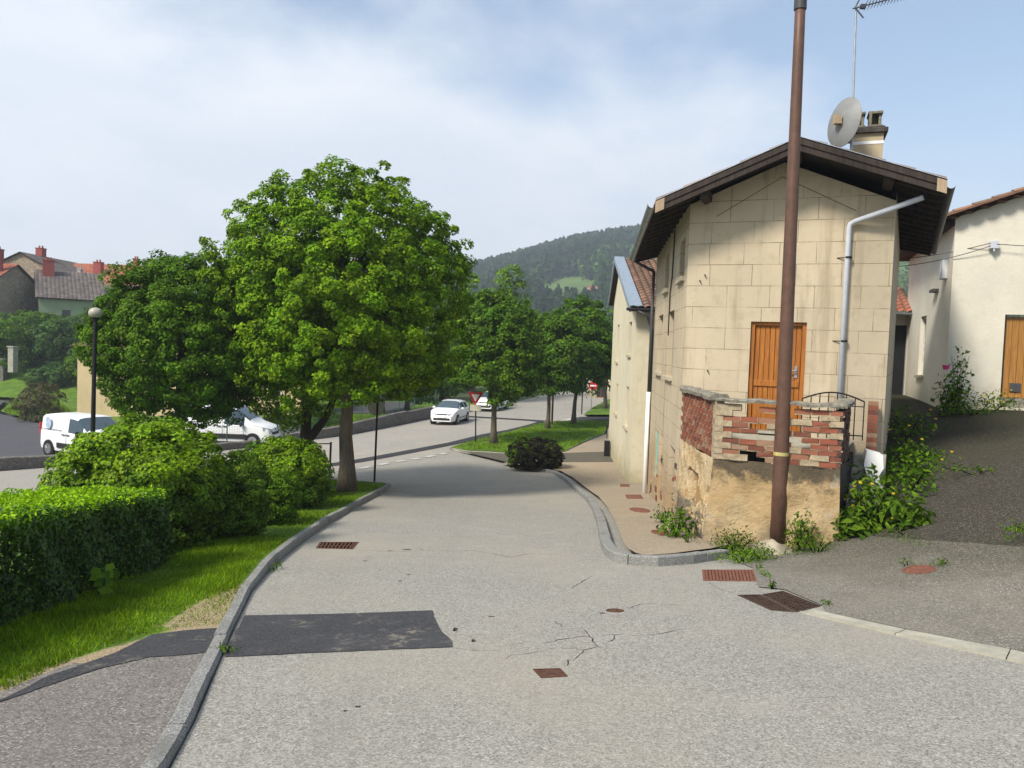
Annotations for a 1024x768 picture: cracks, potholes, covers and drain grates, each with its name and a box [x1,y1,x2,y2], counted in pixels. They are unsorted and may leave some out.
drain grate [762,591,821,612]
drain grate [702,570,757,582]
crack [459,621,681,666]
drain grate [738,594,794,612]
manhole cover [533,668,568,678]
manhole cover [902,565,936,574]
